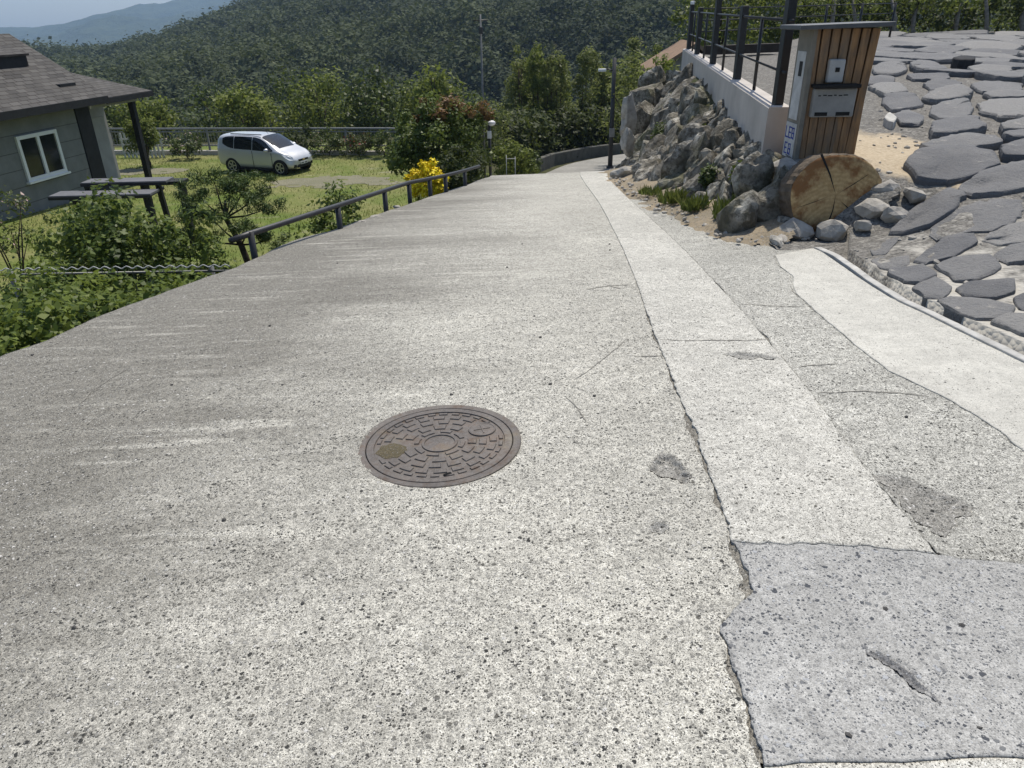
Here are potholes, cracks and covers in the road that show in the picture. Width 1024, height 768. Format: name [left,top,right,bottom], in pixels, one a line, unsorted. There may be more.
pothole [648,452,694,484]
manhole cover [358,405,521,488]
